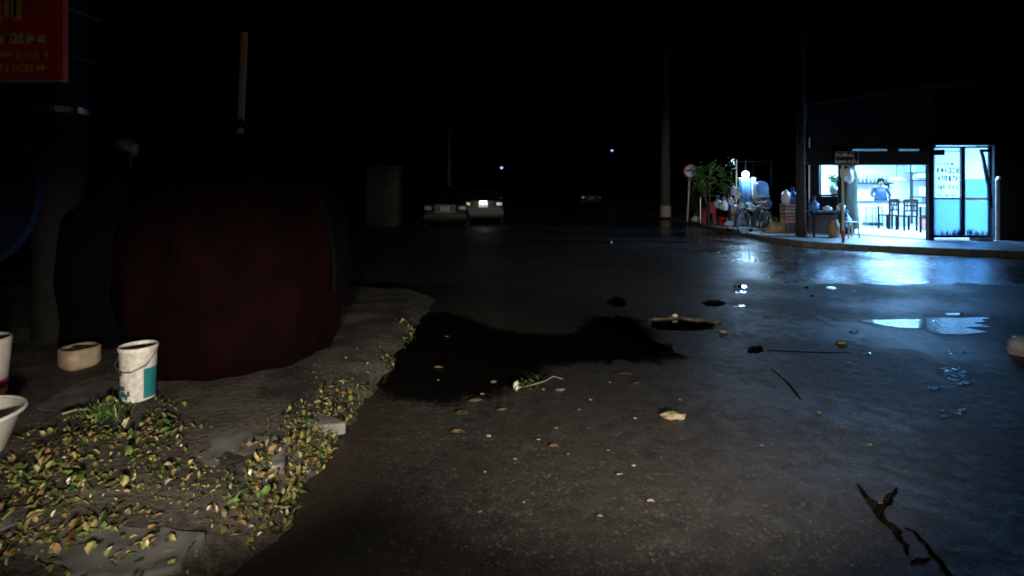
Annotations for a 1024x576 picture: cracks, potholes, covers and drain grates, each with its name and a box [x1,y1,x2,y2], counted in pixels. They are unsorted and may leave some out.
crack [857,483,954,576]
crack [766,350,850,400]
pothole [606,295,627,307]
pothole [646,317,722,331]
